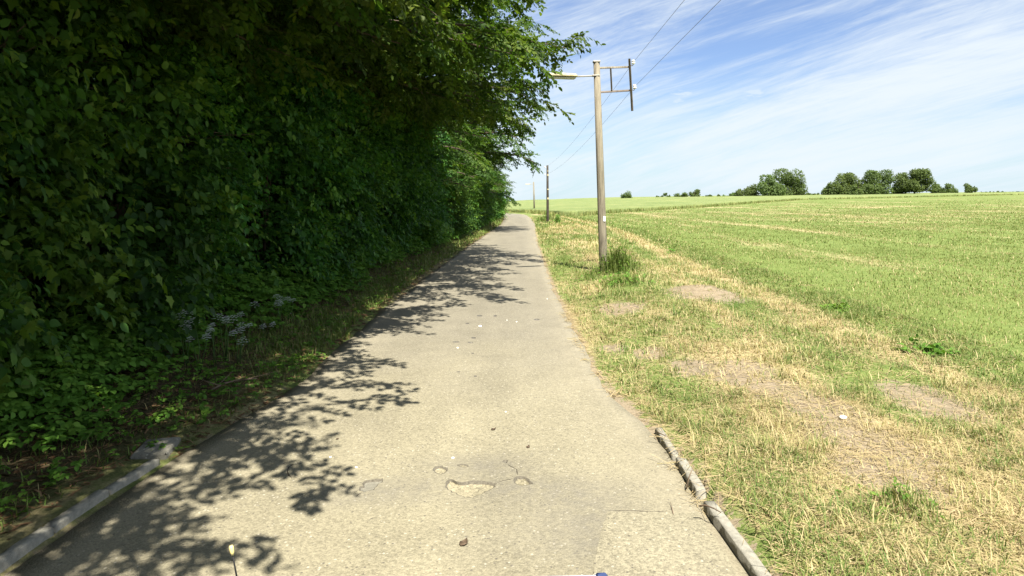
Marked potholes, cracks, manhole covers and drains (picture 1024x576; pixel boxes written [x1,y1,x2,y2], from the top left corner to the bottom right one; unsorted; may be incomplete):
pothole [513,476,533,486]
pothole [359,478,383,492]
pothole [445,478,497,498]
